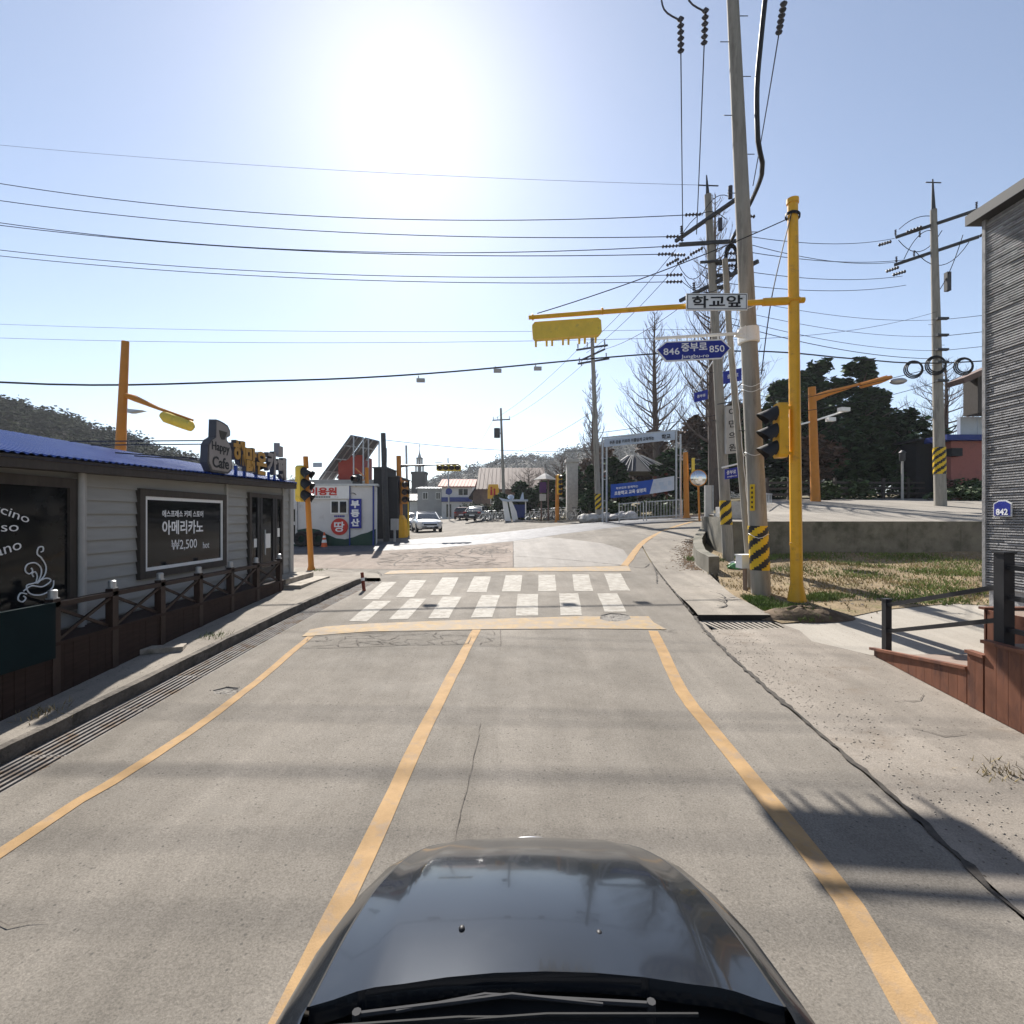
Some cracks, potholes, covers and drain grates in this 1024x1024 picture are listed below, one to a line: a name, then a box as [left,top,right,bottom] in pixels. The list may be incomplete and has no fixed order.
drain grate [261,617,309,632]
crack [455,723,481,838]
drain grate [176,651,248,676]
drain grate [0,755,67,794]
drain grate [113,676,205,710]
drain grate [24,709,148,757]
crack [307,630,471,647]
drain grate [702,621,786,630]
drain grate [224,632,282,652]
crack [332,544,649,575]
